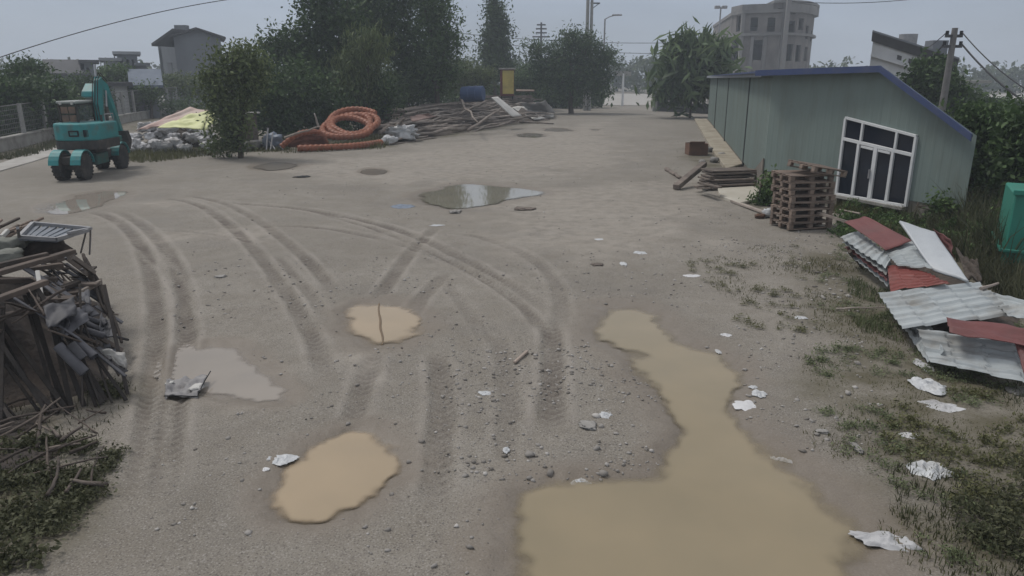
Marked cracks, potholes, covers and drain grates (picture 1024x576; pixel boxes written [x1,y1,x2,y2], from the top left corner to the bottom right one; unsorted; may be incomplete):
pothole [405,182,554,210]
pothole [153,337,305,408]
pothole [241,417,424,532]
pothole [328,295,443,352]
pothole [465,298,909,576]
pothole [32,188,140,215]
